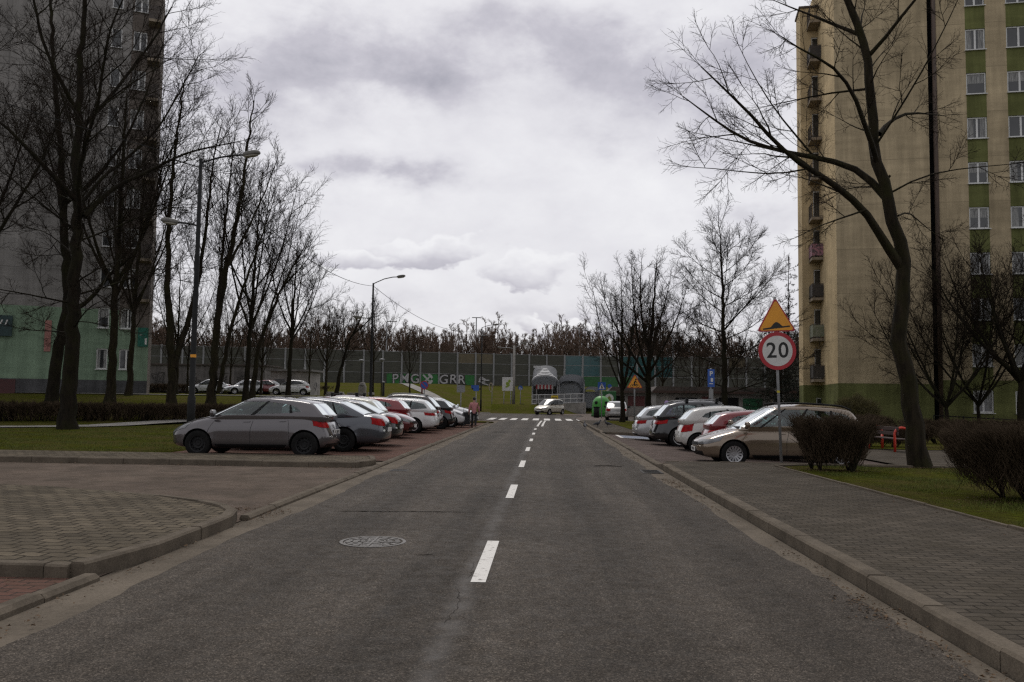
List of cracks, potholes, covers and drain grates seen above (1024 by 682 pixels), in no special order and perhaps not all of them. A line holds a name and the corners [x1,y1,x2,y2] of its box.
manhole cover [339,536,406,548]
